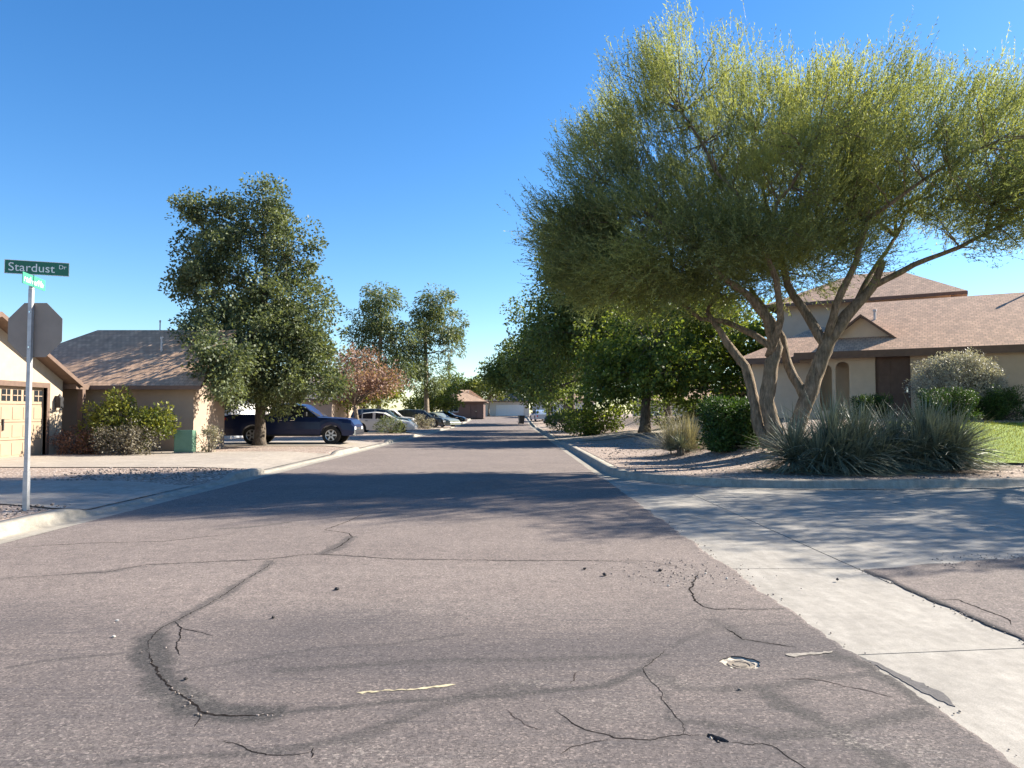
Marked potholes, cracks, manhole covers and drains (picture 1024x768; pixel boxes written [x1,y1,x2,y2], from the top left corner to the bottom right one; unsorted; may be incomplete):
crack [689,574,780,610]
crack [19,514,672,727]
crack [223,741,314,758]
crack [937,599,1011,624]
crack [555,649,702,754]
crack [733,742,805,768]
pothole [705,733,729,743]
